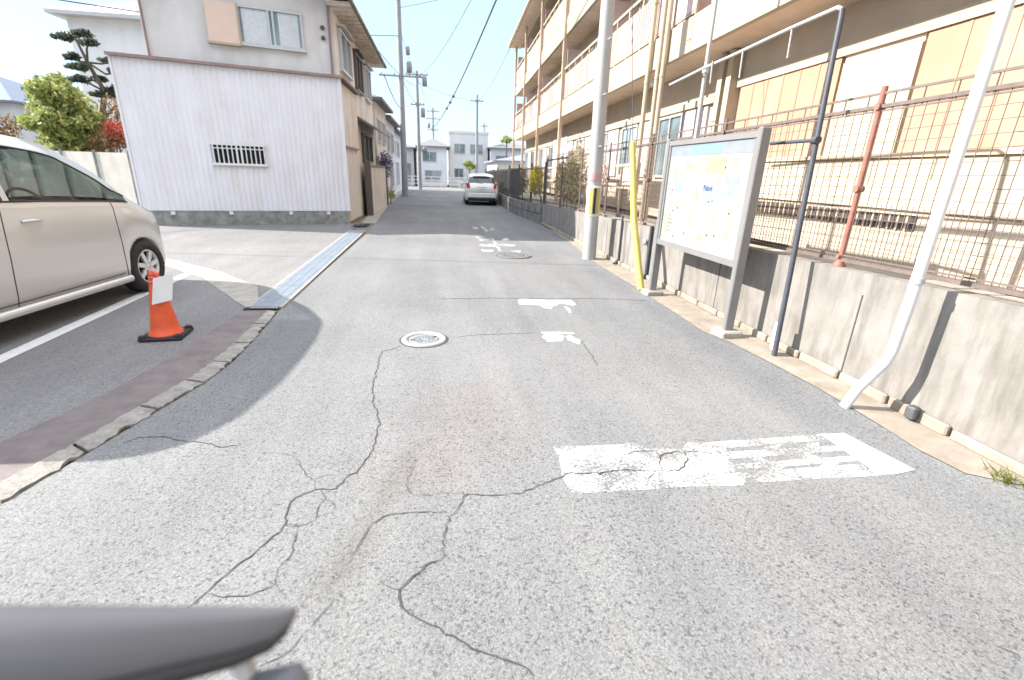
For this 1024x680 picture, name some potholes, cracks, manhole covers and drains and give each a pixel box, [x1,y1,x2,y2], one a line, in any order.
crack [344,450,714,676]
drain grate [247,286,305,309]
drain grate [275,270,322,287]
drain grate [325,242,353,250]
crack [190,345,401,606]
crack [260,598,335,666]
manhole cover [399,331,449,348]
drain grate [297,258,335,272]
drain grate [311,249,345,260]
